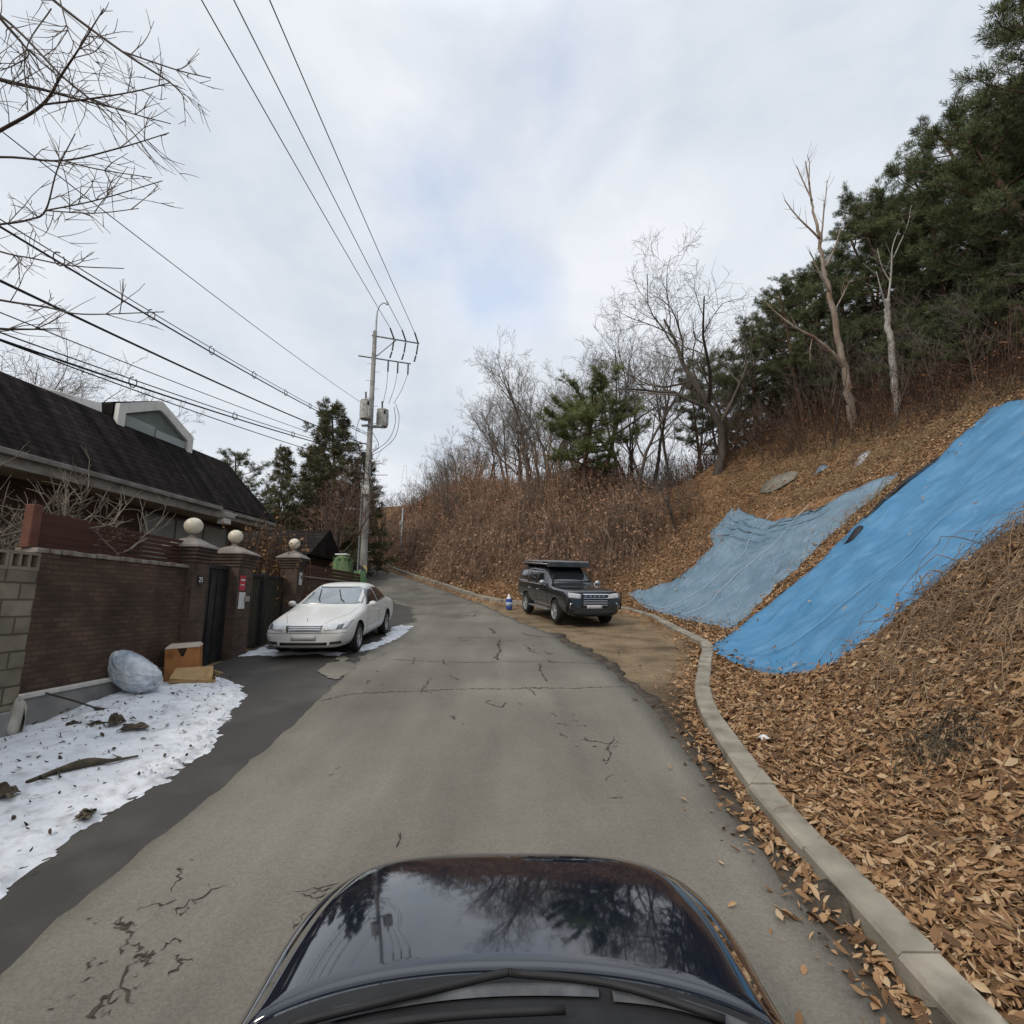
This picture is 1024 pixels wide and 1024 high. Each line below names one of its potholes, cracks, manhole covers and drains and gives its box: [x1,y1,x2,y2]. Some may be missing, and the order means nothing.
crack [322,615,629,707]
crack [47,859,223,1019]
crack [551,713,618,780]
crack [287,883,338,928]
